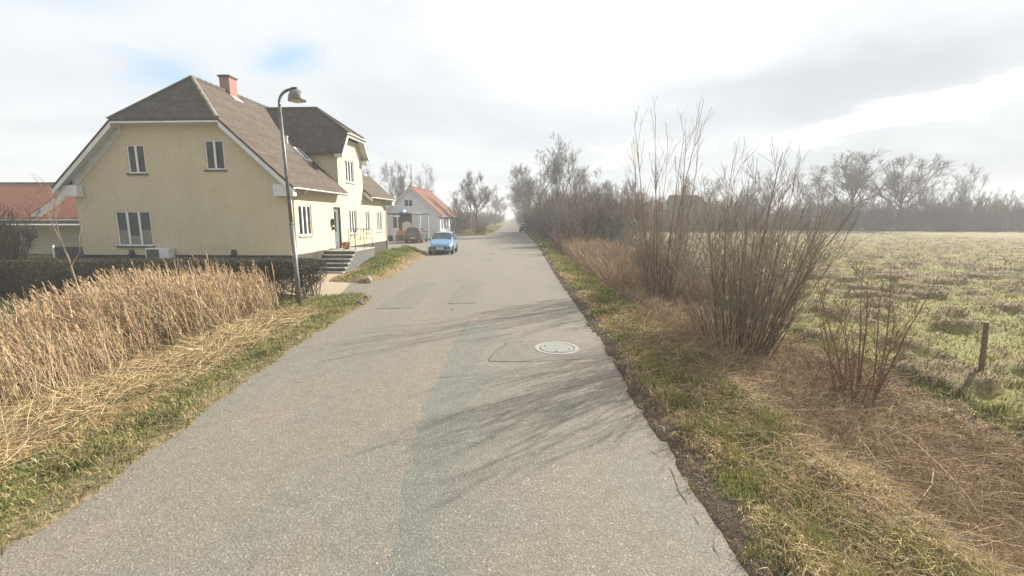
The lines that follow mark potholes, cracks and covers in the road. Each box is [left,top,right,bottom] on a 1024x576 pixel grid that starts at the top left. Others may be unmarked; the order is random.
manhole cover [535,342,579,355]
